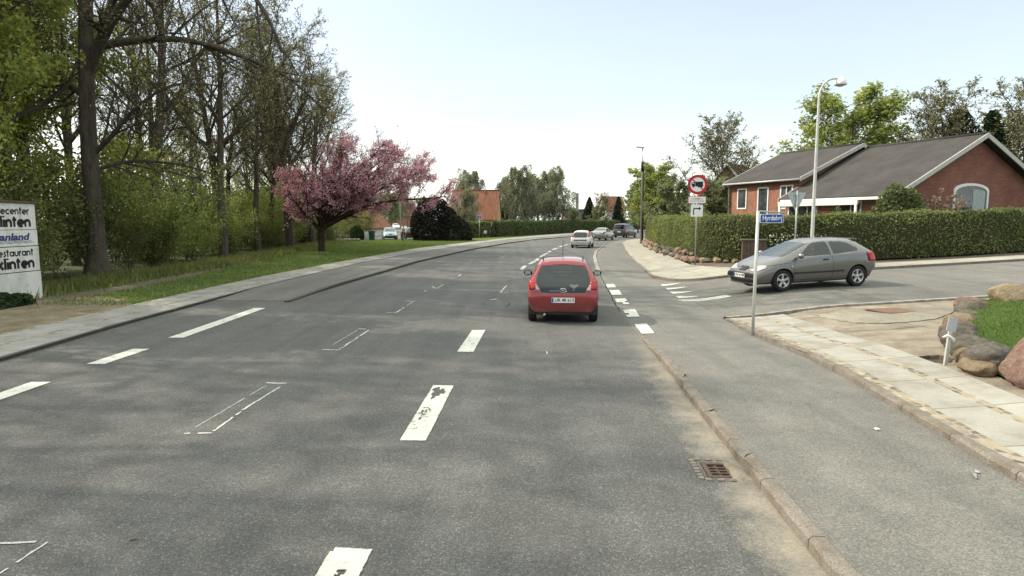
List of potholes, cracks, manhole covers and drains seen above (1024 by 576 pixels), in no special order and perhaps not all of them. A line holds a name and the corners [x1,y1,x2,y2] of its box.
drain grate [688,458,736,482]
